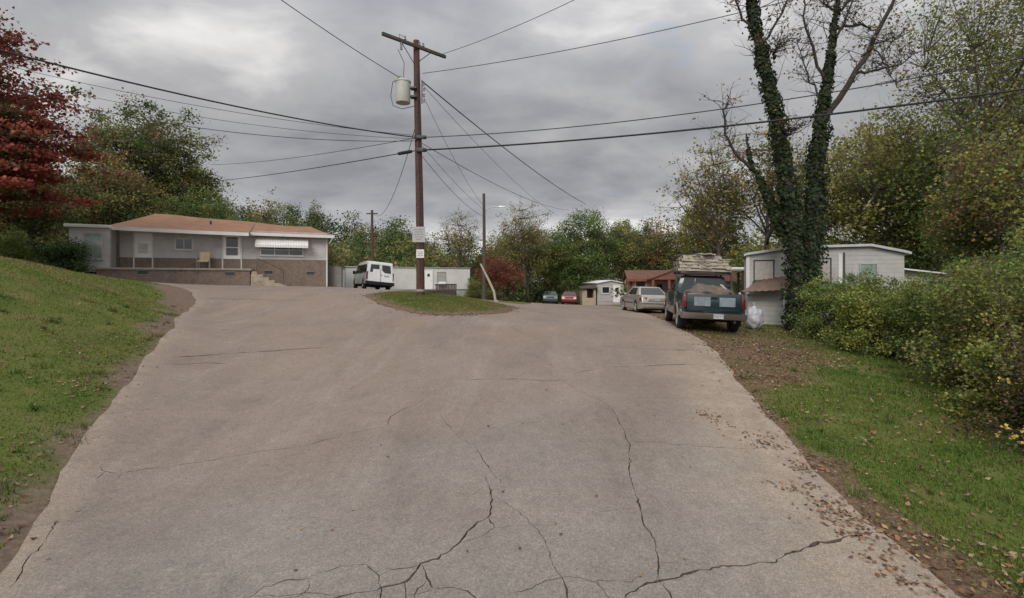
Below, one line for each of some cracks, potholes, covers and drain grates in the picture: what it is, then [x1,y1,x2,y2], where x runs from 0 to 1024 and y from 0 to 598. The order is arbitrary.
crack [250,379,889,598]
crack [97,389,436,480]
crack [10,520,58,587]
crack [182,348,309,364]
